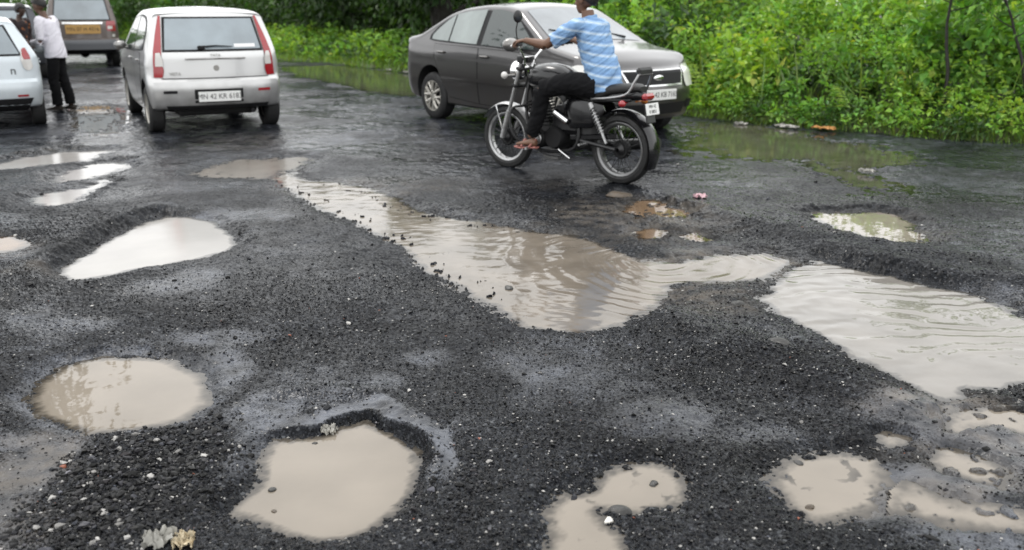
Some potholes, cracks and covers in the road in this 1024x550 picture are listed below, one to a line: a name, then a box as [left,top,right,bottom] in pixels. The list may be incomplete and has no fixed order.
pothole [736,248,1024,406]
pothole [505,441,720,550]
pothole [262,172,805,338]
pothole [178,151,325,182]
pothole [30,205,260,282]
pothole [0,340,232,440]
pothole [738,430,924,540]
pothole [0,144,127,171]
pothole [3,174,131,208]
pothole [786,202,959,244]
pothole [196,403,447,546]
pothole [31,156,146,184]
